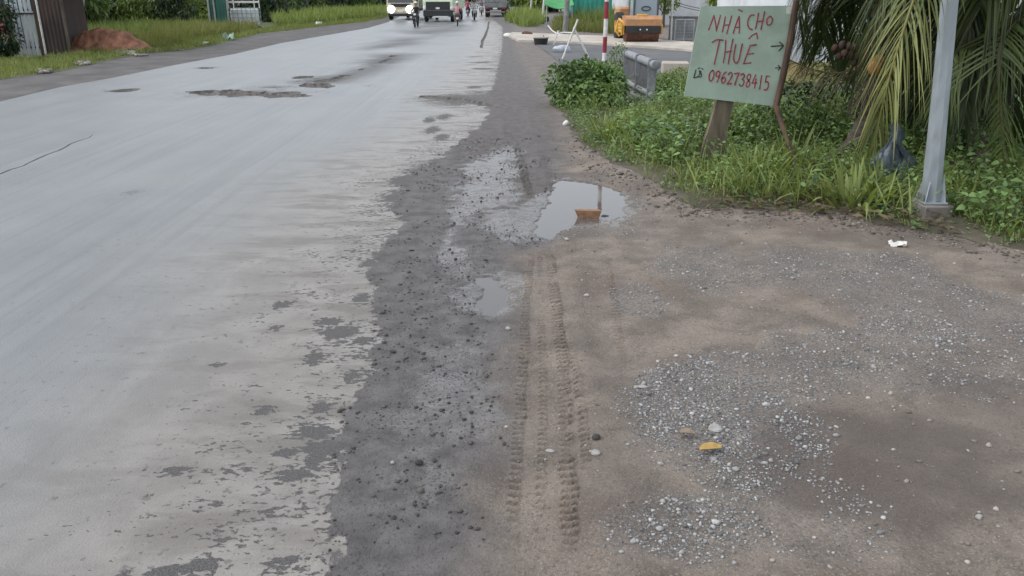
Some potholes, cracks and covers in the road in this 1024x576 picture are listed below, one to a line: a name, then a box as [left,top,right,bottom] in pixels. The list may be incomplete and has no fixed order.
pothole [313,75,350,83]
pothole [186,89,311,98]
crack [0,134,93,174]
pothole [469,275,517,317]
pothole [530,177,633,240]
